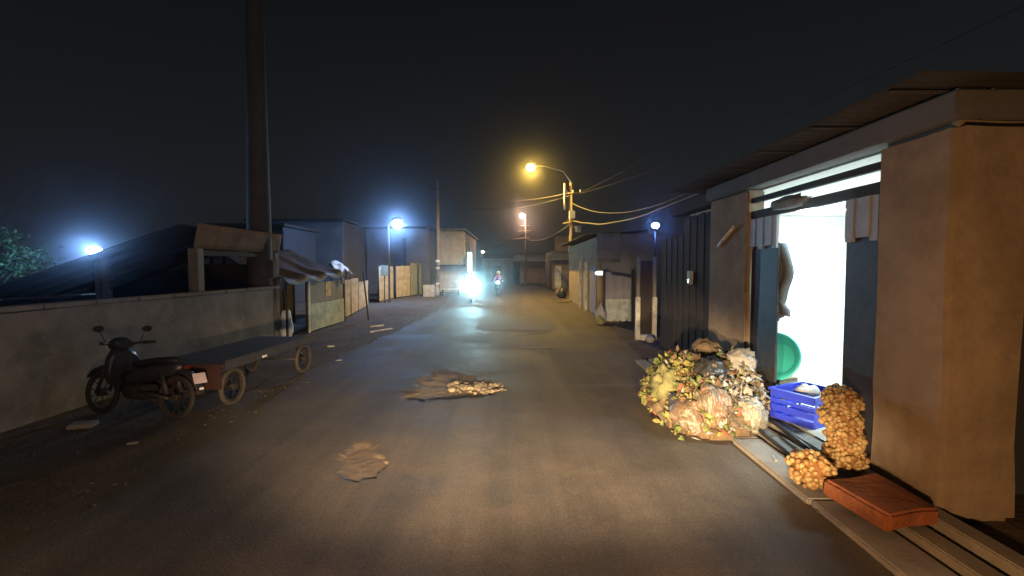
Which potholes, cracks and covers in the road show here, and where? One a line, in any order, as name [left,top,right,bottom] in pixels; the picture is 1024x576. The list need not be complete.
pothole [327,441,390,483]
pothole [397,369,511,404]
